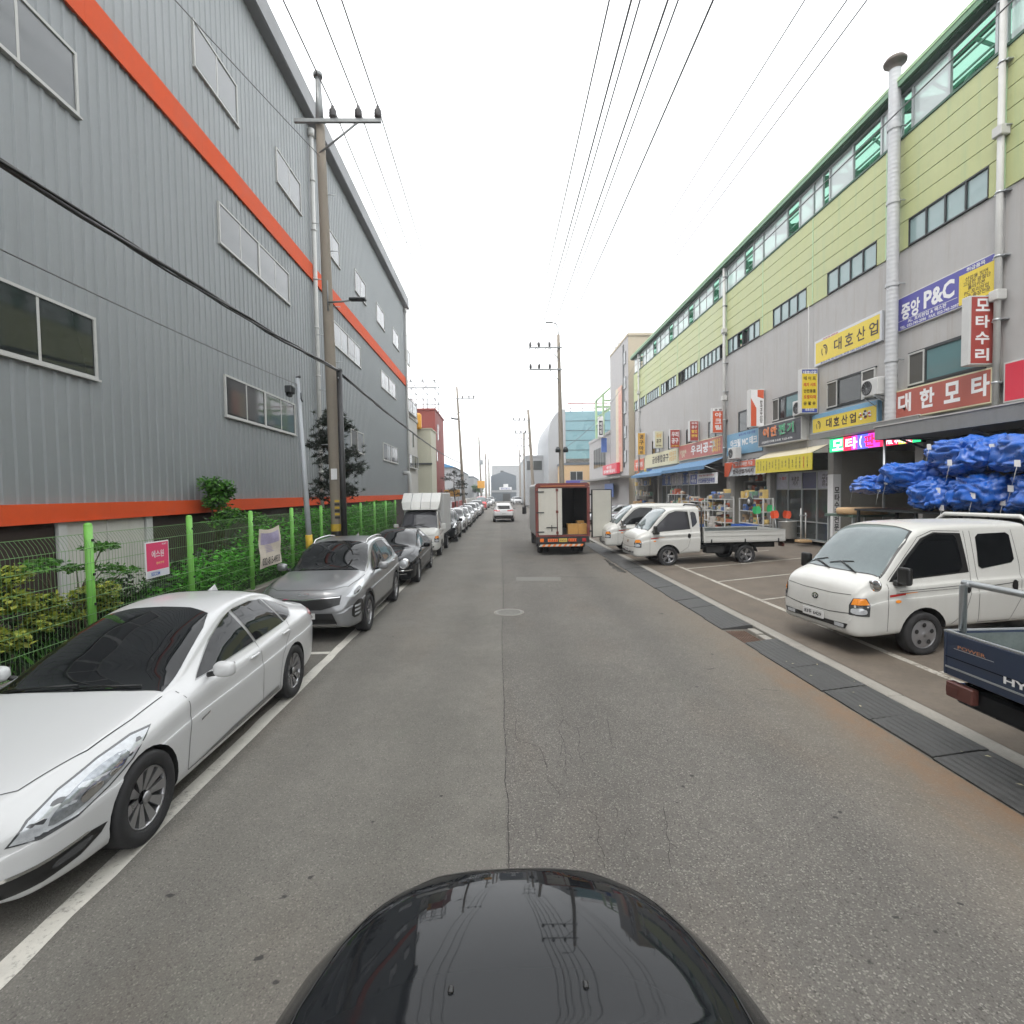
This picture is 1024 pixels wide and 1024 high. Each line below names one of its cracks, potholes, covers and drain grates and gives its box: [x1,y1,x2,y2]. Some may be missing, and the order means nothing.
crack [590,807,635,870]
crack [663,806,679,870]
crack [509,703,612,796]
